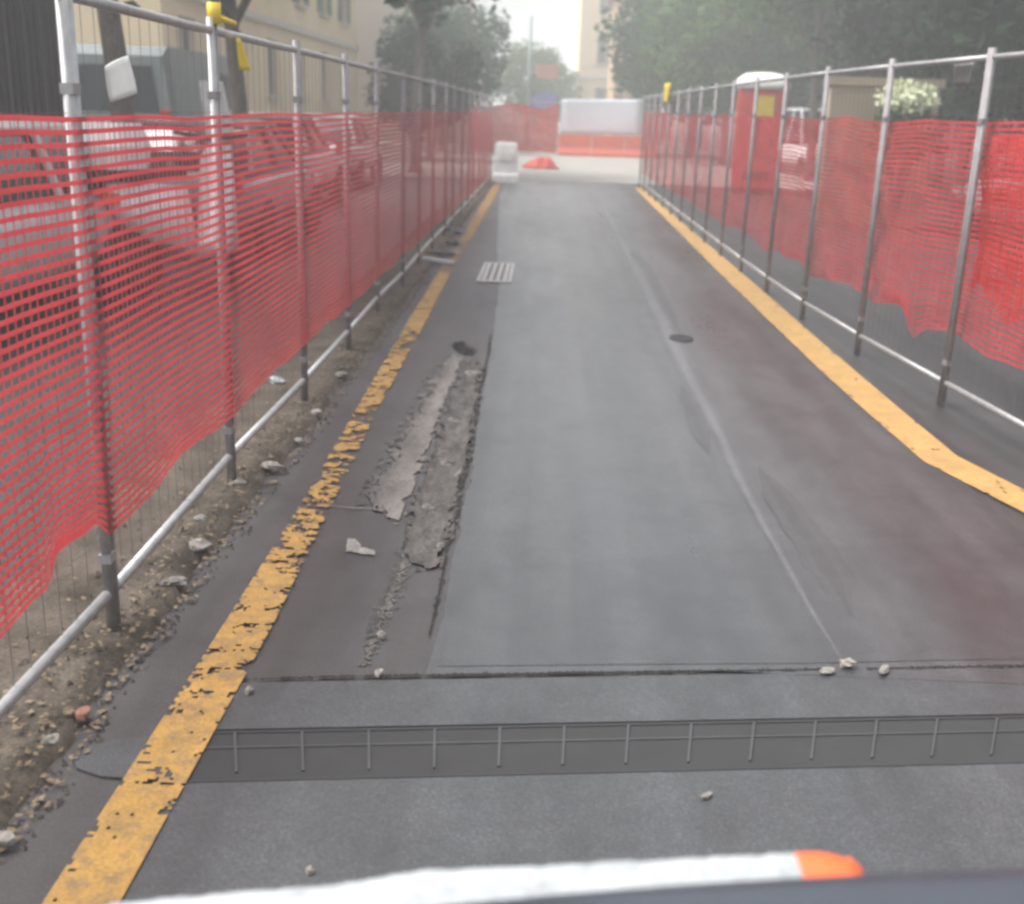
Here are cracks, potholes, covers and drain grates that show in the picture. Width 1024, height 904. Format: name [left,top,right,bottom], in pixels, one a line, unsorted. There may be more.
crack [758,466,858,615]
manhole cover [669,334,694,342]
drain grate [72,715,1024,783]
pothole [452,341,475,356]
pothole [395,359,487,571]
